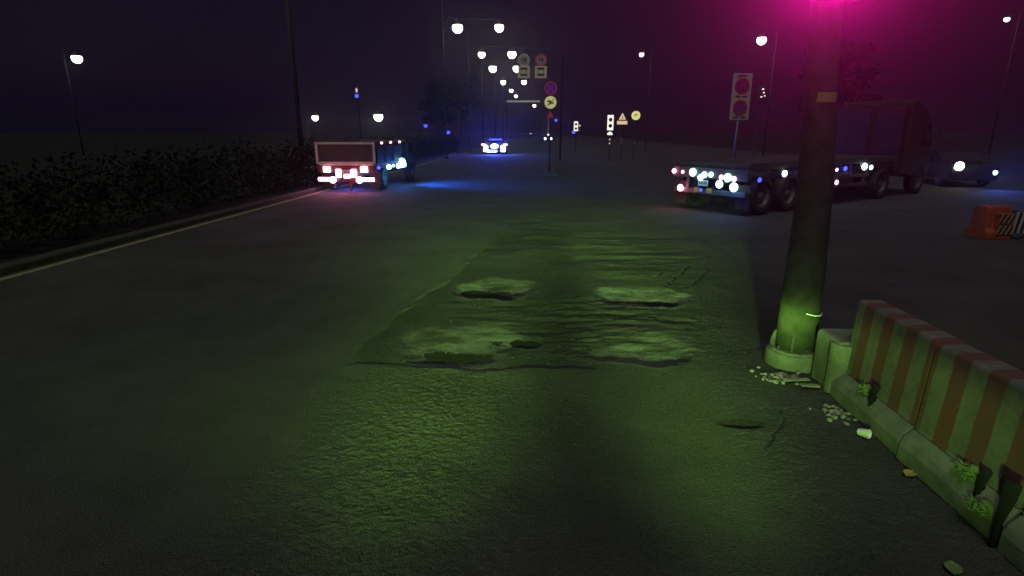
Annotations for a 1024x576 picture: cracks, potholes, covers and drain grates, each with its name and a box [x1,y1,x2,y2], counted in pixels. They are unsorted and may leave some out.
pothole [450,277,542,301]
pothole [720,421,762,429]
crack [658,265,710,288]
pothole [571,335,700,368]
pothole [390,323,525,372]
crack [764,410,786,450]
pothole [588,285,699,309]
pothole [523,334,544,349]
